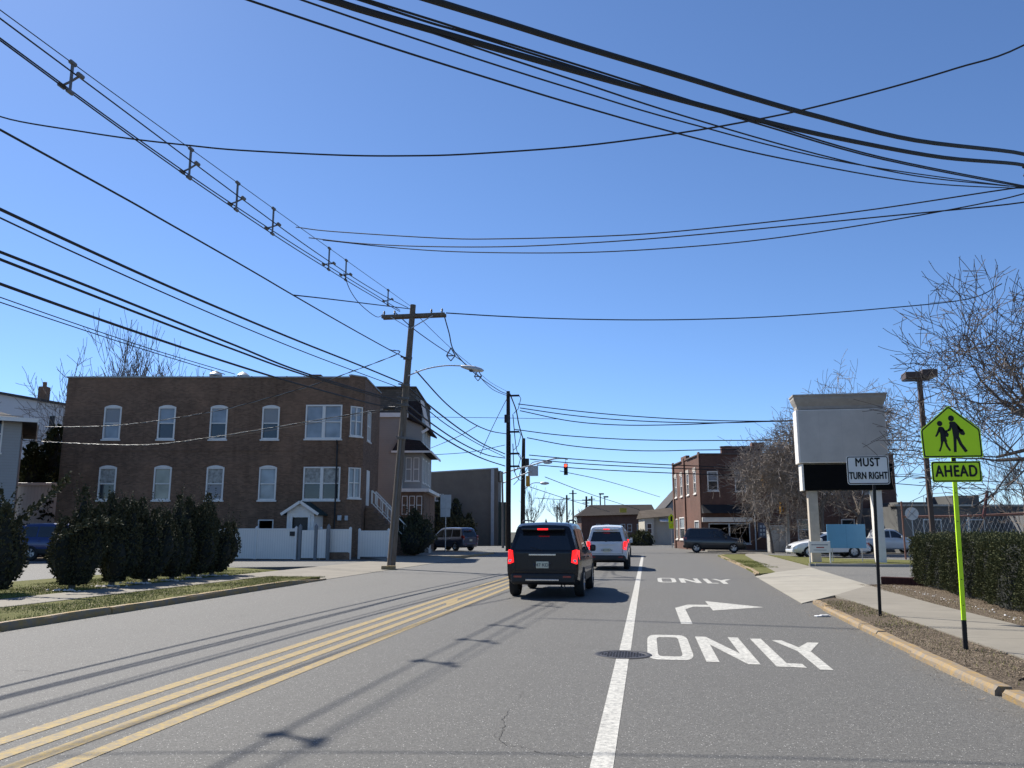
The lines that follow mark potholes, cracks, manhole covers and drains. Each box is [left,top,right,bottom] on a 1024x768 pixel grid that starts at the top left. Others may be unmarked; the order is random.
manhole cover [593,650,652,659]
